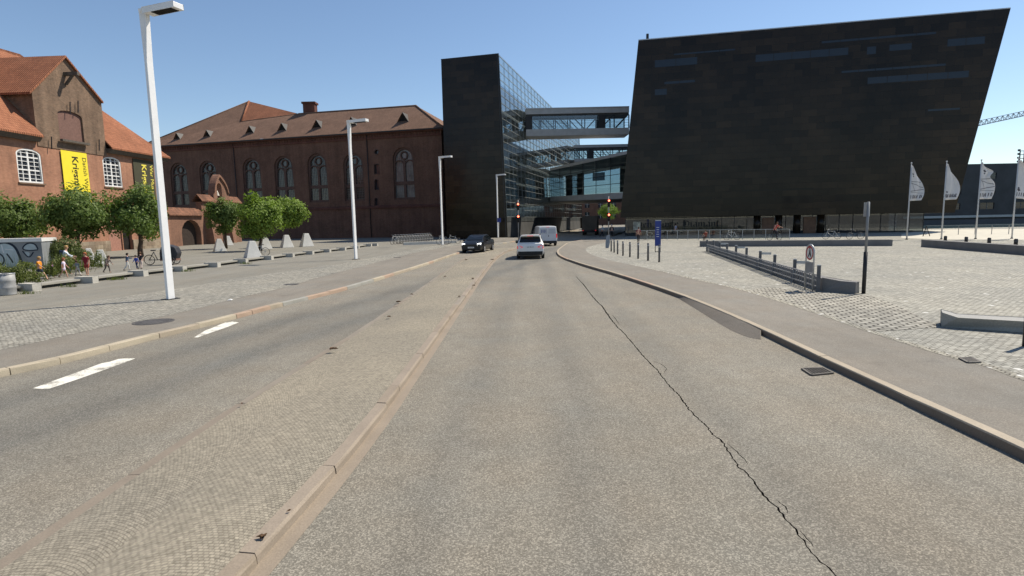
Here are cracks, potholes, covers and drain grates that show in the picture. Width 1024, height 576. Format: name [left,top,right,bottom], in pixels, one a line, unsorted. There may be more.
drain grate [801,367,834,376]
crack [579,280,836,576]
